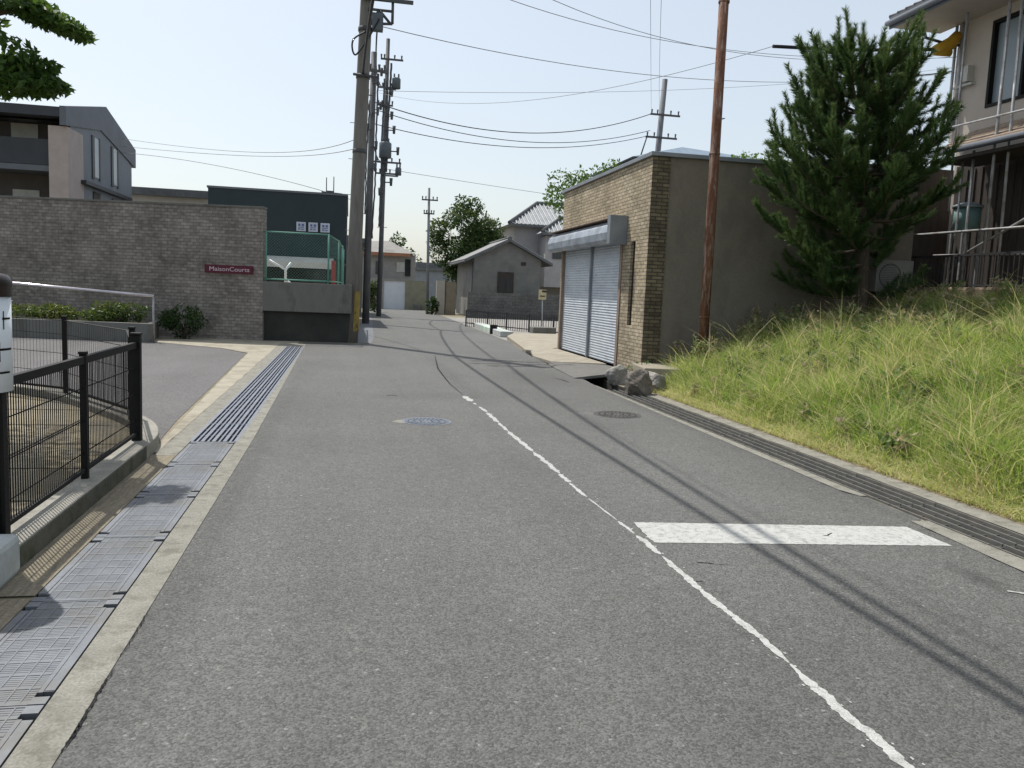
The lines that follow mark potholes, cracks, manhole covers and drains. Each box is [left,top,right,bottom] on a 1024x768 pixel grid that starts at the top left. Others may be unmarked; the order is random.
manhole cover [393,417,451,426]
drain grate [30,536,166,602]
drain grate [0,705,44,768]
drain grate [682,420,750,436]
drain grate [223,397,268,410]
drain grate [96,494,197,538]
drain grate [0,599,121,708]
drain grate [653,408,711,421]
drain grate [628,398,680,409]
drain grate [990,544,1024,559]
drain grate [138,464,219,495]
drain grate [761,452,857,476]
